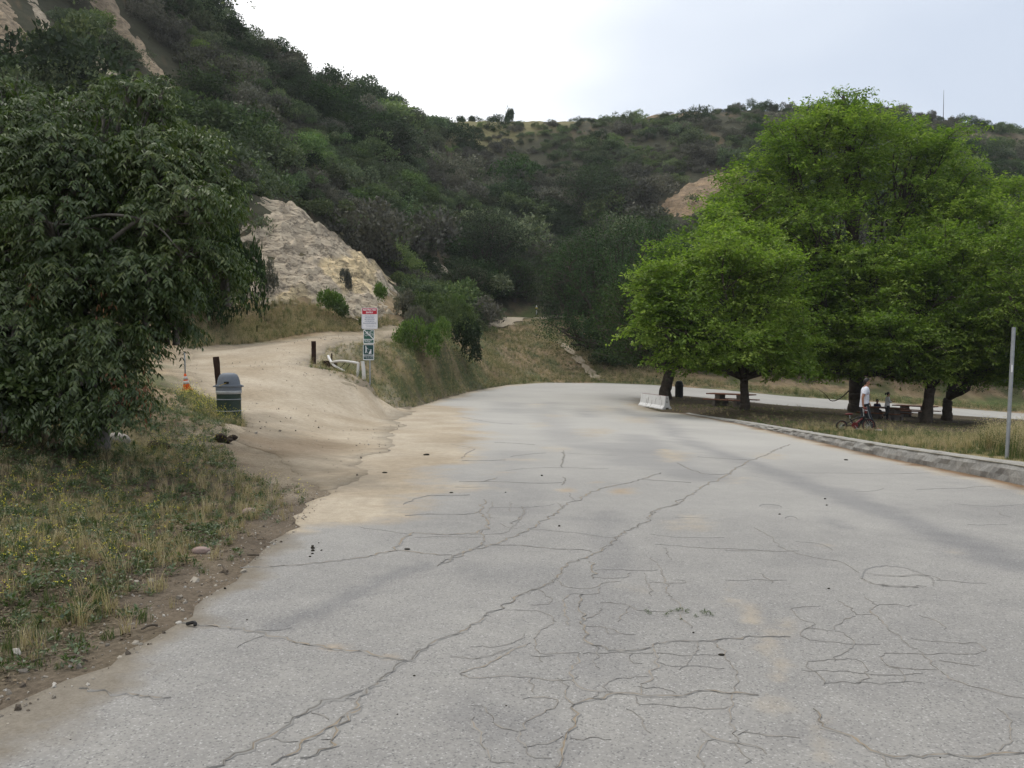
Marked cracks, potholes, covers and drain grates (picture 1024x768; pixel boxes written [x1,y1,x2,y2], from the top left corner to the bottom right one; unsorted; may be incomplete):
crack [182,442,1024,768]
